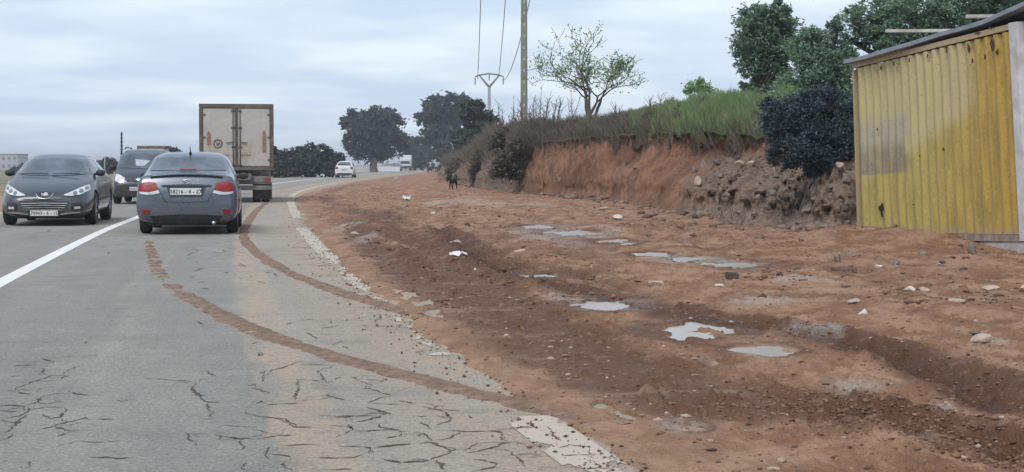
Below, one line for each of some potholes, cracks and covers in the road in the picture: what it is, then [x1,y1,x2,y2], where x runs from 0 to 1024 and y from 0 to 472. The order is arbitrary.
crack [151,342,600,471]
crack [0,341,130,459]
